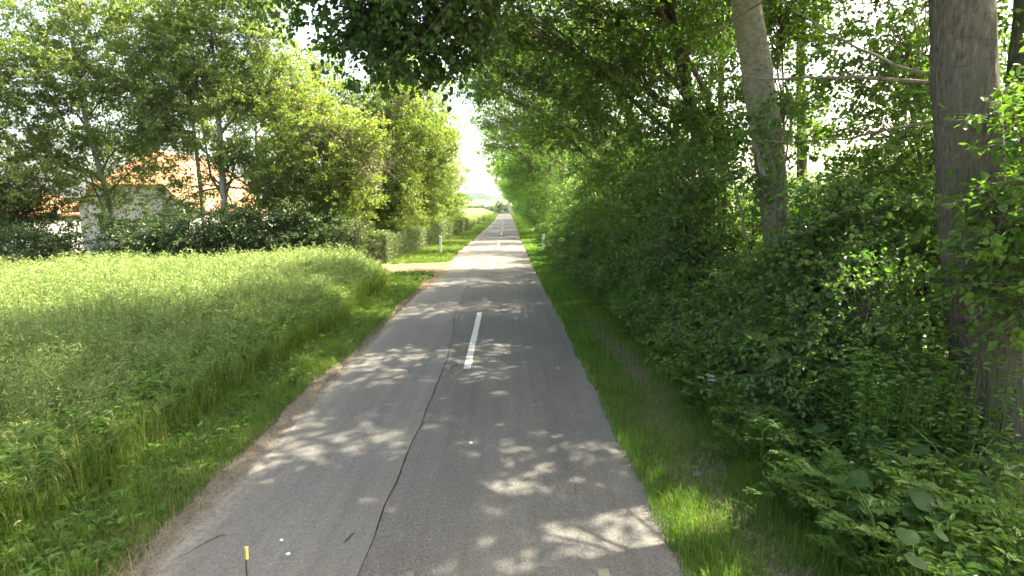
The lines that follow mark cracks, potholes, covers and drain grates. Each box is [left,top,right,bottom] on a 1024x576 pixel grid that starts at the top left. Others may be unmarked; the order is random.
crack [178,534,226,557]
